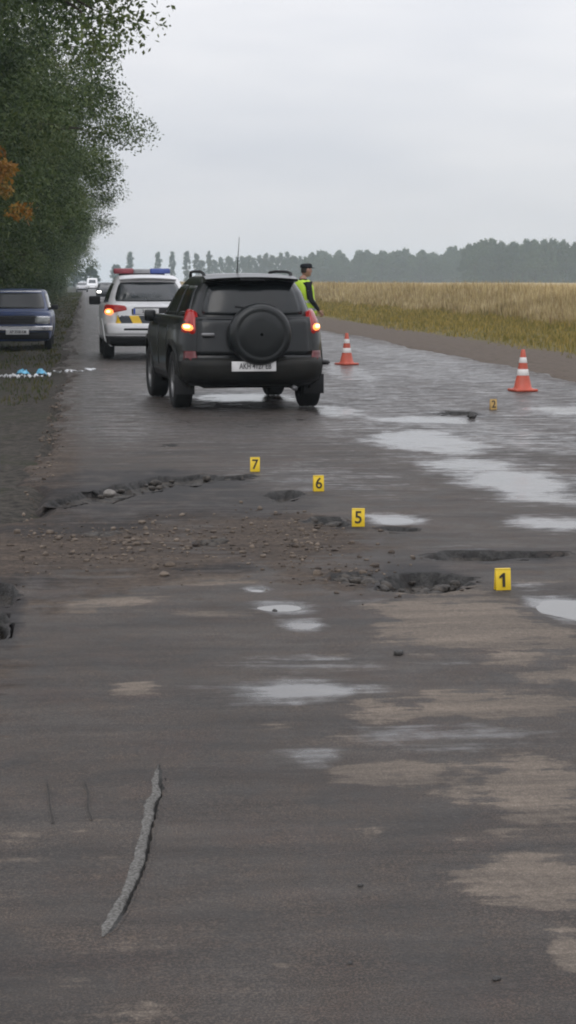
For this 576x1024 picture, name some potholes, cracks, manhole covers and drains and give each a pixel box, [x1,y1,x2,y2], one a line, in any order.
pothole [365,572,486,596]
pothole [258,490,312,503]
pothole [414,550,576,563]
crack [45,782,55,824]
pothole [0,612,14,642]
pothole [42,474,263,510]
pothole [315,571,380,586]
pothole [298,516,352,529]
crack [83,765,169,937]
